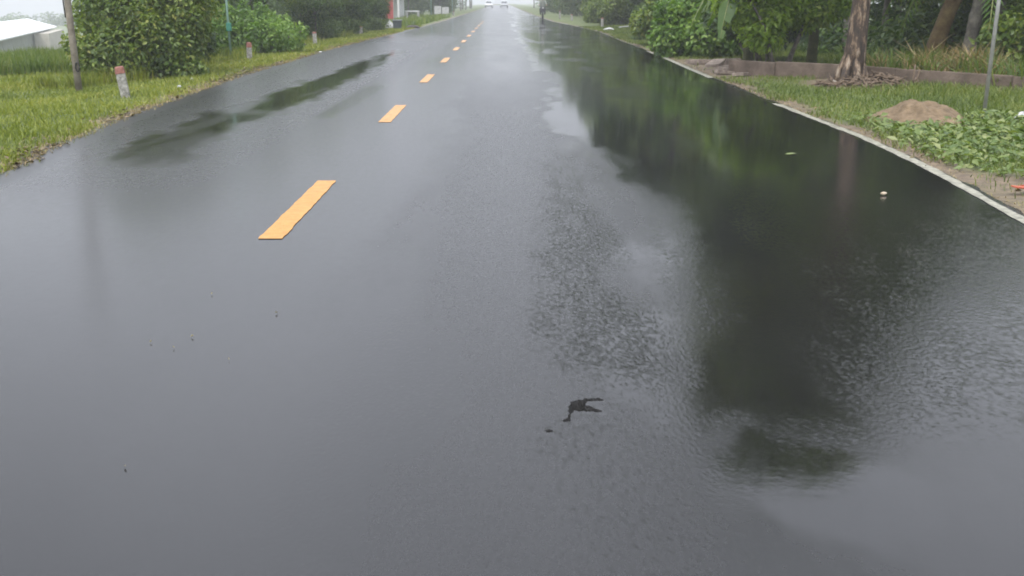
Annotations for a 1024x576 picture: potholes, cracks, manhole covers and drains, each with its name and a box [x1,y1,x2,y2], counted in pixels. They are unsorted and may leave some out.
pothole [563,398,604,423]
